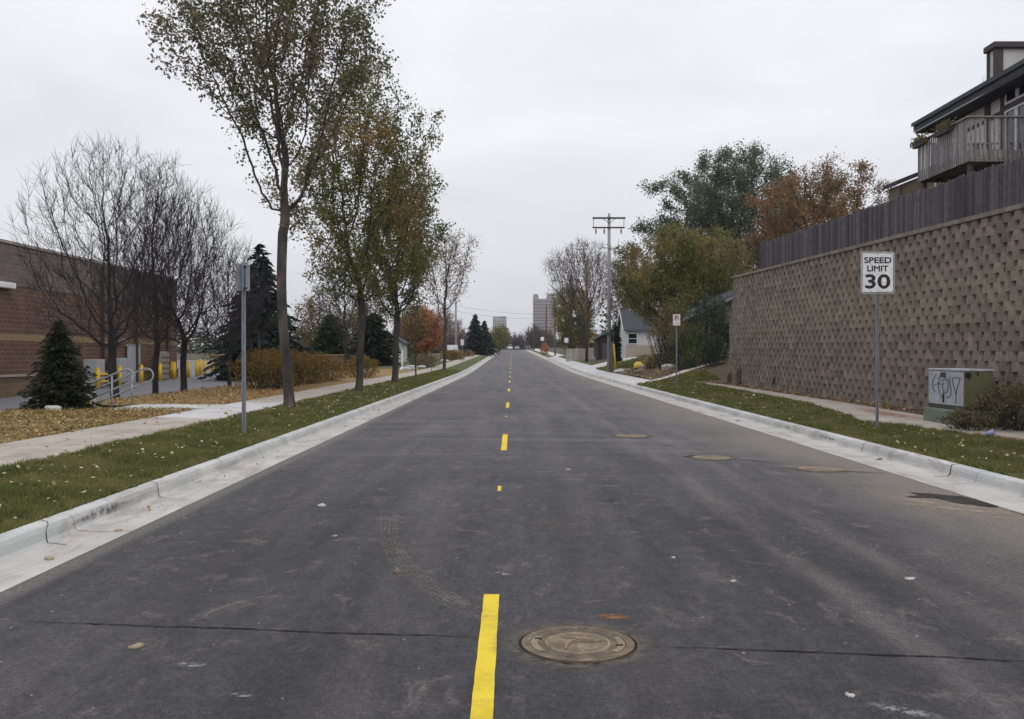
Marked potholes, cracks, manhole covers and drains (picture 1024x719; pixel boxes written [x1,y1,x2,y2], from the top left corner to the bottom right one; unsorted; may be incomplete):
manhole cover [506,622,650,668]
